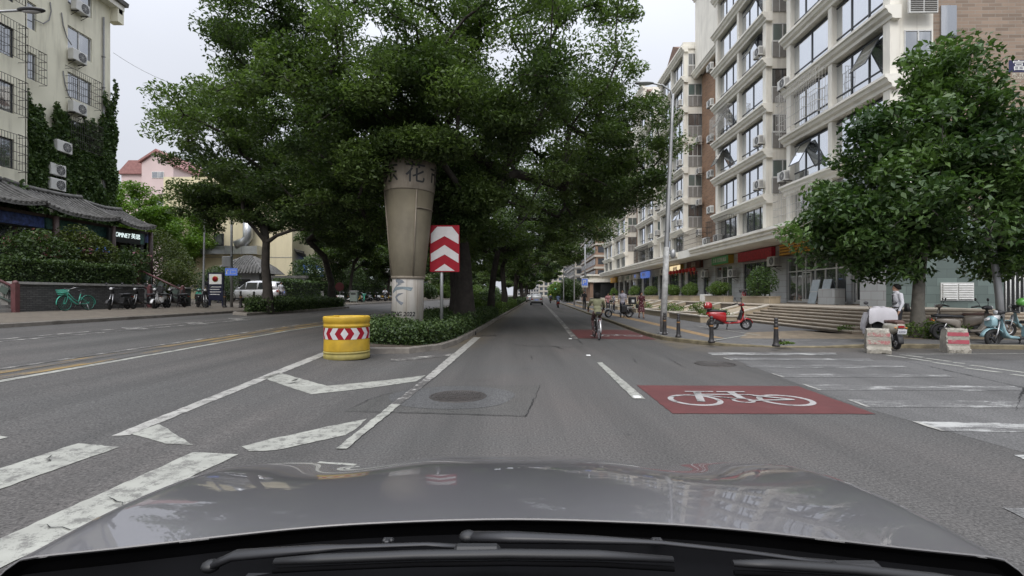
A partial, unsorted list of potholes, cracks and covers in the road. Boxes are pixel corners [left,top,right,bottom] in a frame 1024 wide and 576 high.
manhole cover [430,390,486,403]
